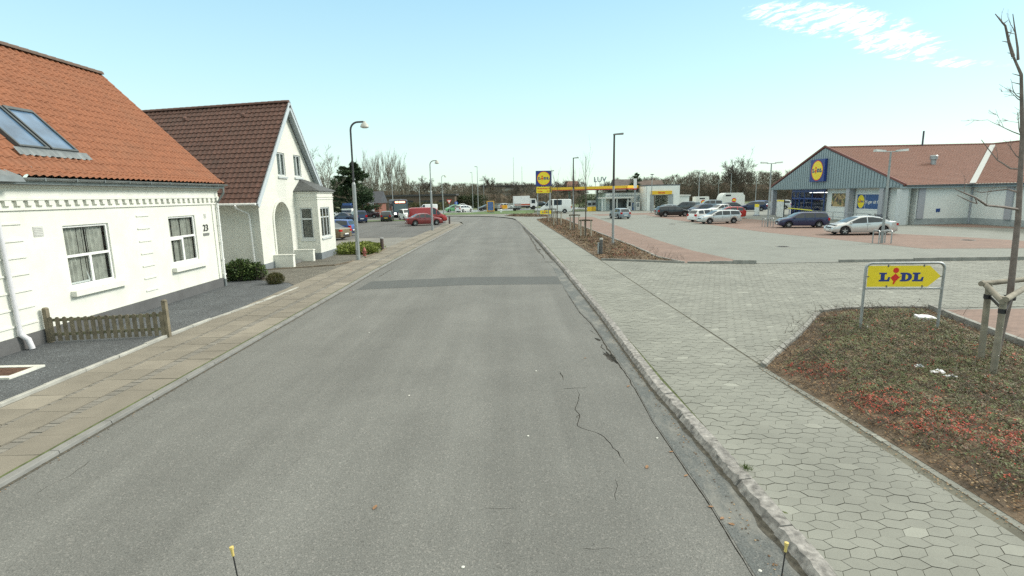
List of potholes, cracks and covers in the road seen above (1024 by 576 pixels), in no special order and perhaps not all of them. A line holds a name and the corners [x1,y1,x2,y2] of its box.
crack [560,289,753,576]
